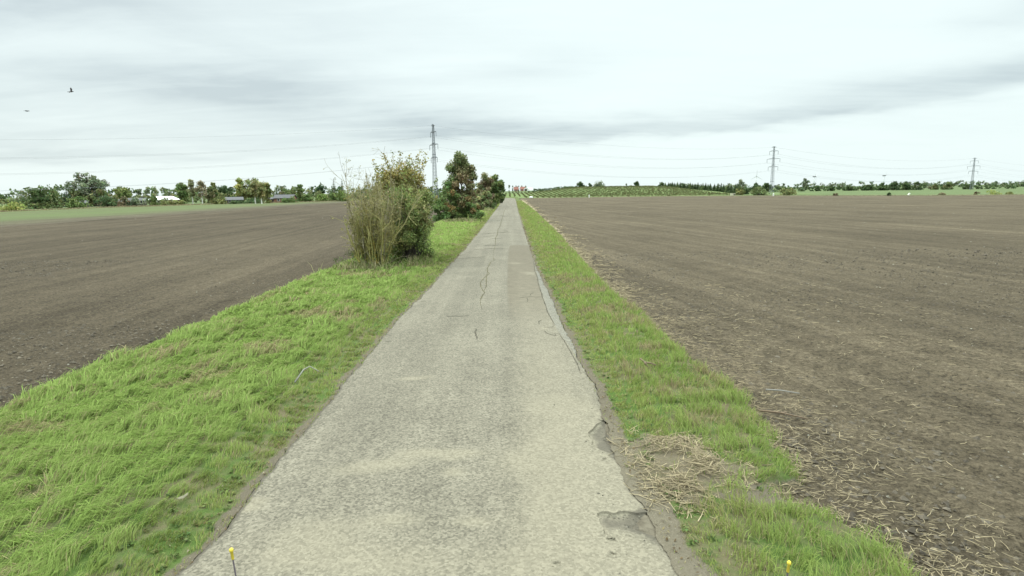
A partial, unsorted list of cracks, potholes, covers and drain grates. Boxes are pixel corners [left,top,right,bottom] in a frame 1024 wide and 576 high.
pothole [593,509,657,541]
crack [521,261,580,371]
pothole [585,419,615,458]
crack [459,213,504,339]
